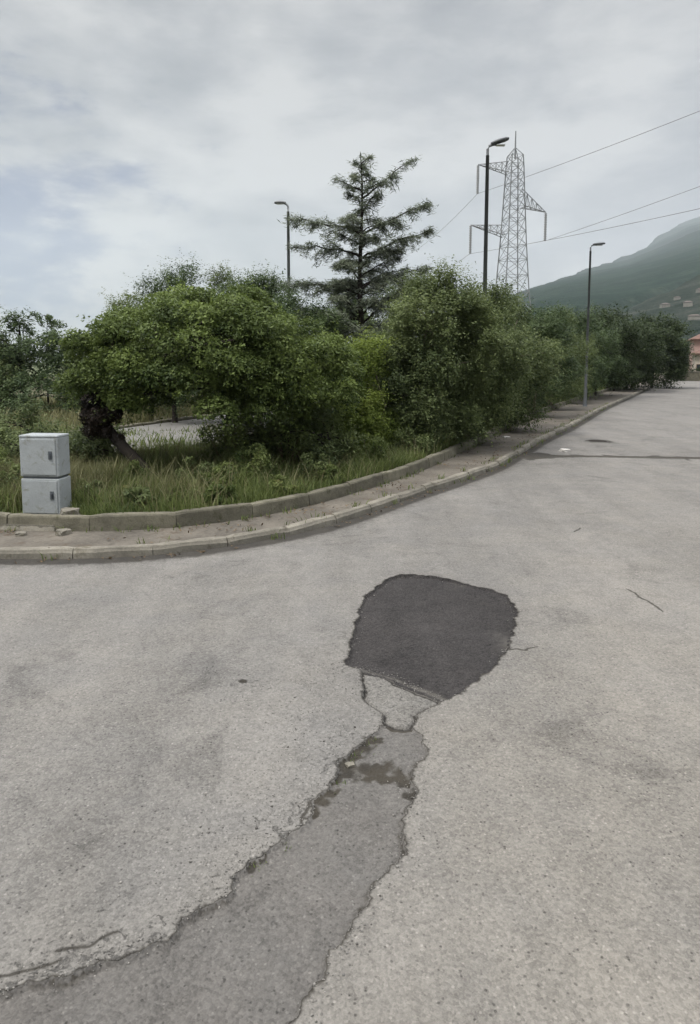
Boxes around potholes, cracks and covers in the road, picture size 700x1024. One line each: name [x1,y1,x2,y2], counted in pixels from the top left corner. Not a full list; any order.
crack [6,932,114,976]
pothole [0,725,428,1024]
